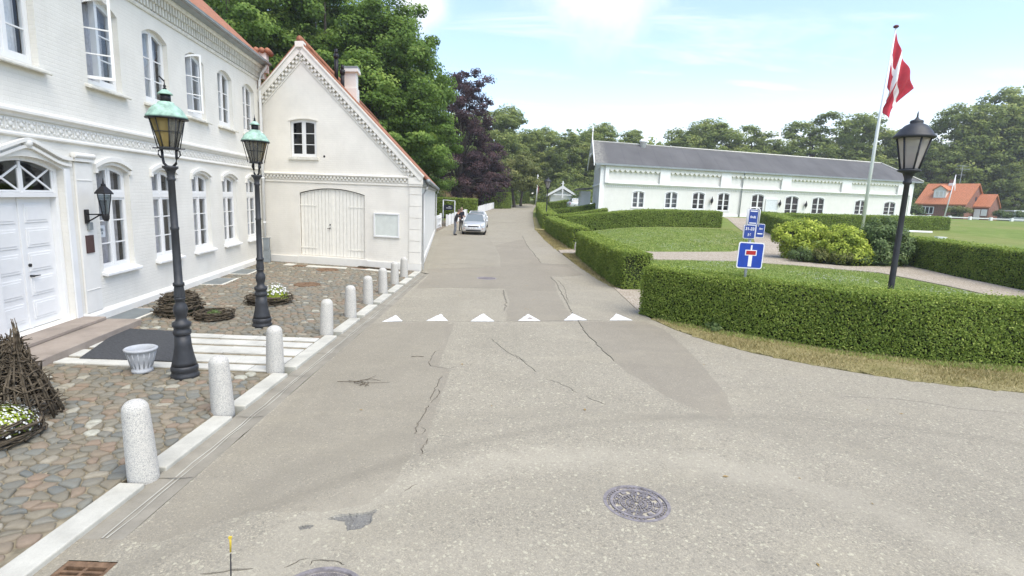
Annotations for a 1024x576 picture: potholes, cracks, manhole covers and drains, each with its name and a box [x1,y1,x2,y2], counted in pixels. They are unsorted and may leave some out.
manhole cover [294,566,359,576]
manhole cover [603,485,671,522]
crack [523,238,614,361]
drain grate [50,561,117,576]
crack [414,350,456,455]
